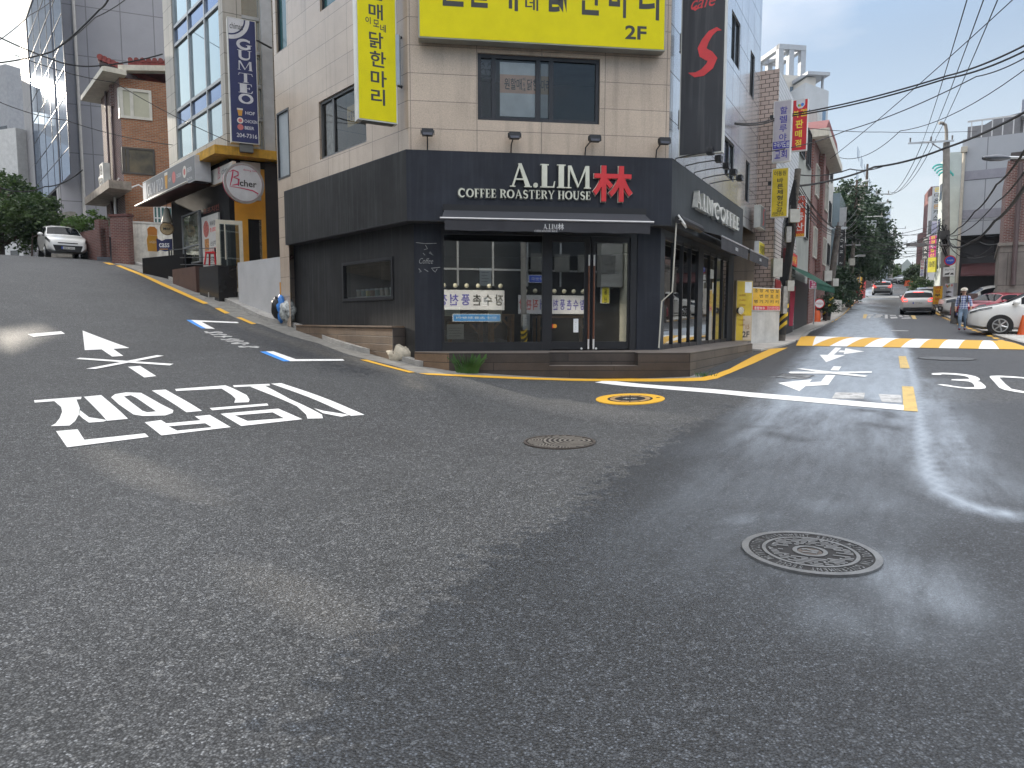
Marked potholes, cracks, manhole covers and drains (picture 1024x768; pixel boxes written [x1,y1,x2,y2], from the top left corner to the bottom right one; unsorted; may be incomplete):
manhole cover [524,435,596,450]
manhole cover [742,531,883,578]
manhole cover [596,393,665,405]
